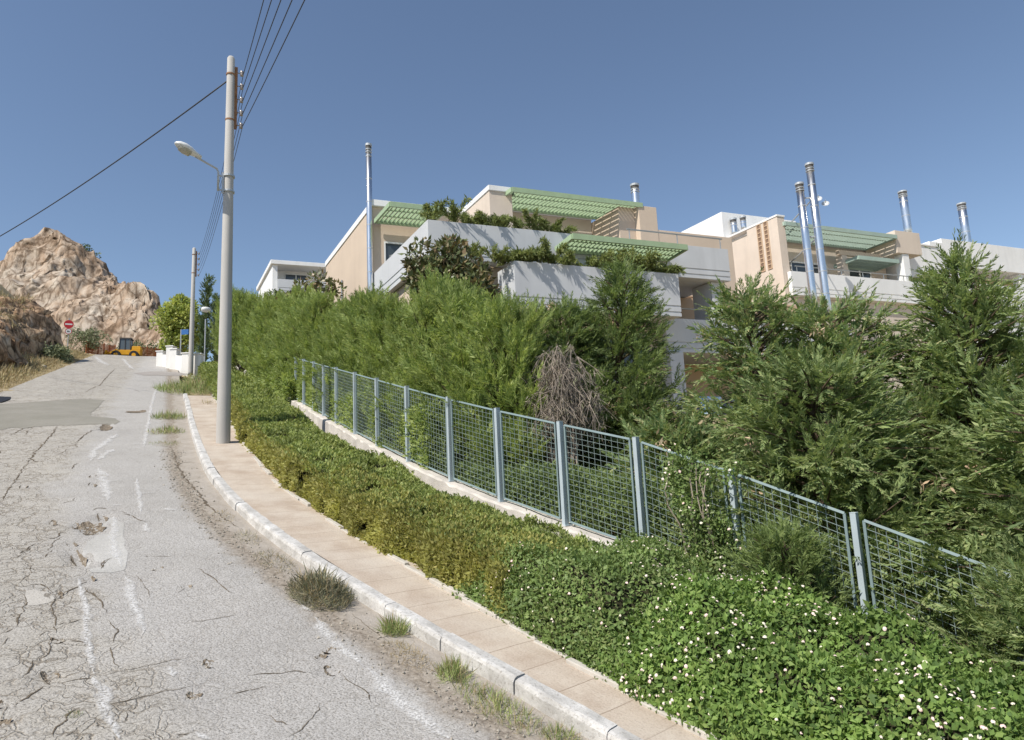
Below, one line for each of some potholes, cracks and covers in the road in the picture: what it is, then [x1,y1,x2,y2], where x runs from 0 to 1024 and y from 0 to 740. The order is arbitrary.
crack [0,425,91,503]
crack [1,531,187,736]
